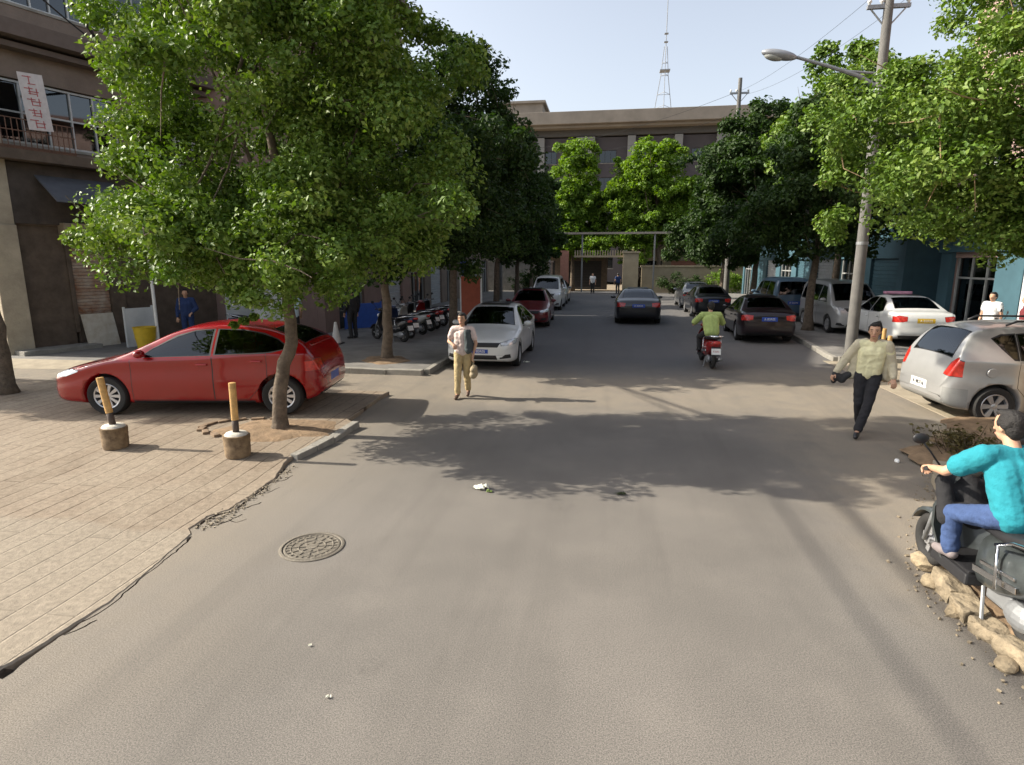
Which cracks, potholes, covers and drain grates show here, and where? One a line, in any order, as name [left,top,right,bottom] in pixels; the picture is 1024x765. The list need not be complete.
crack [0,468,293,679]
manhole cover [278,532,345,562]
